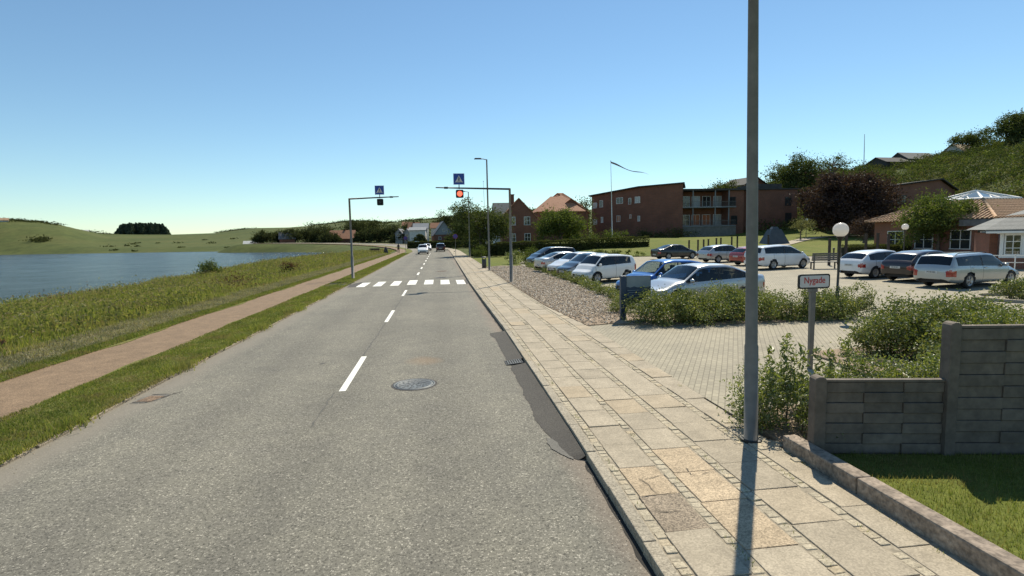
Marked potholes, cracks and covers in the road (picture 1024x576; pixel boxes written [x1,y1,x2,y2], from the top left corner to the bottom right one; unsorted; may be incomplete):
manhole cover [391,378,437,391]
